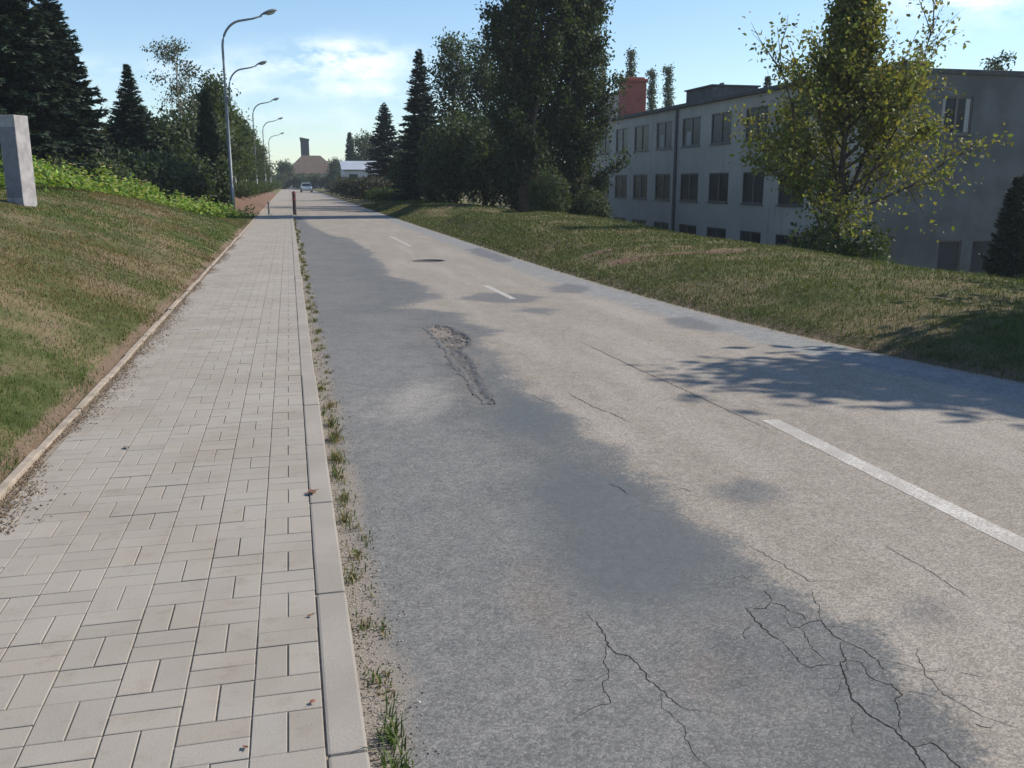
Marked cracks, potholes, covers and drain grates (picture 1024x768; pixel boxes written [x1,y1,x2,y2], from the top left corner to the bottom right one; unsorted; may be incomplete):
crack [734,576,1013,768]
crack [568,612,705,764]
pothole [423,324,494,405]
